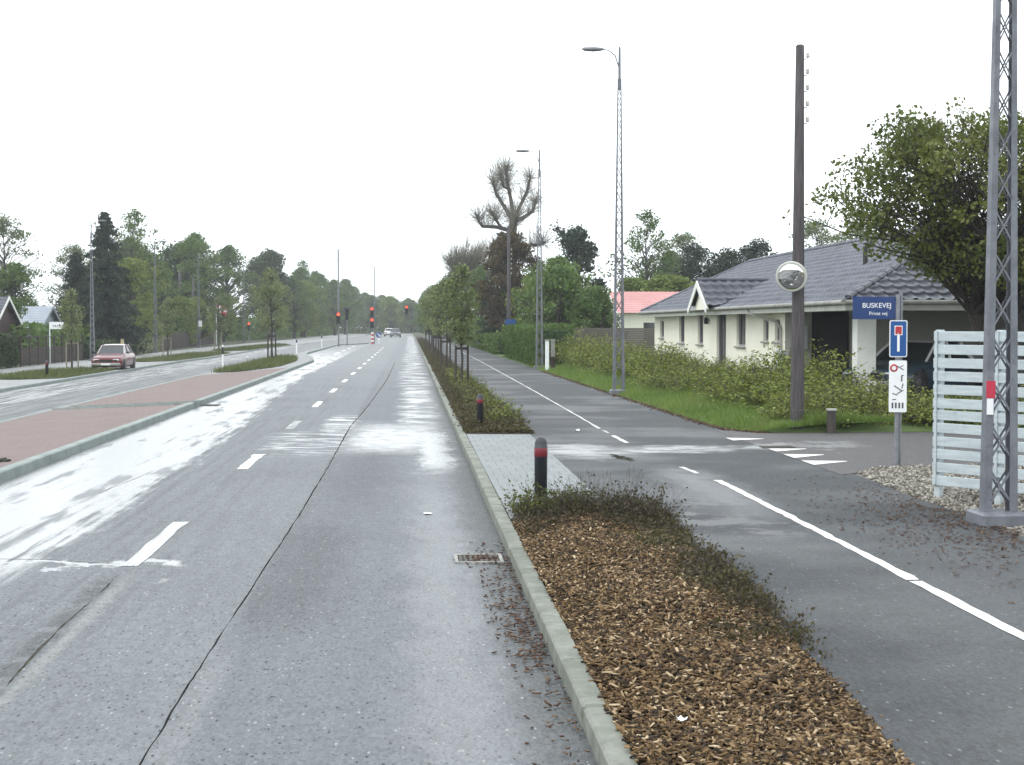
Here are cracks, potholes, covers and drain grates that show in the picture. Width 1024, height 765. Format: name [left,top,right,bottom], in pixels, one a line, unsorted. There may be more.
crack [7,559,117,685]
drain grate [454,554,504,564]
